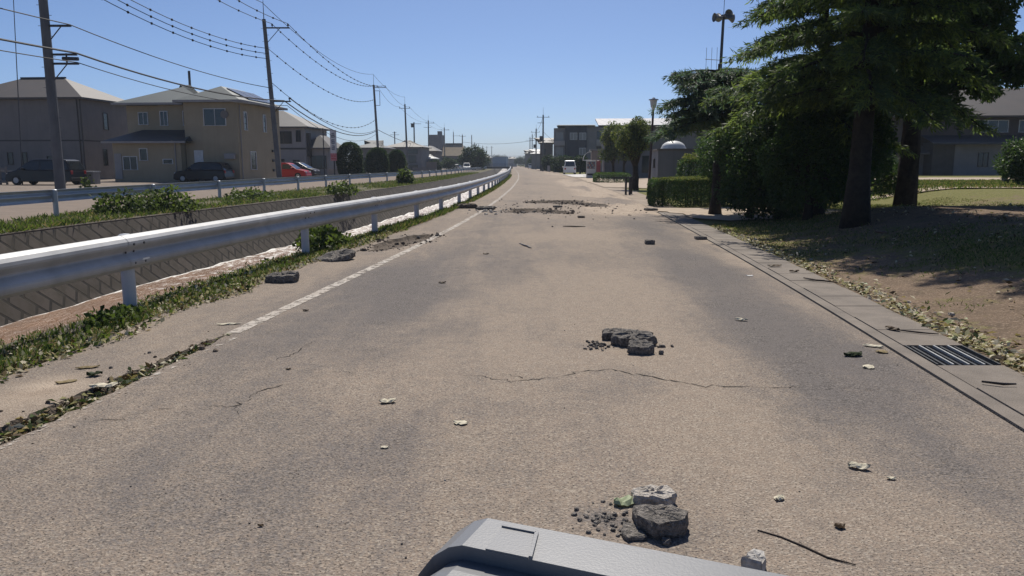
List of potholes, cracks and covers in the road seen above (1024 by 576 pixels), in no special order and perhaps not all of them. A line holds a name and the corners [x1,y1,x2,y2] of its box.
pothole [357,232,446,252]
drain grate [904,345,1001,366]
crack [480,369,879,390]
pothole [523,199,610,207]
